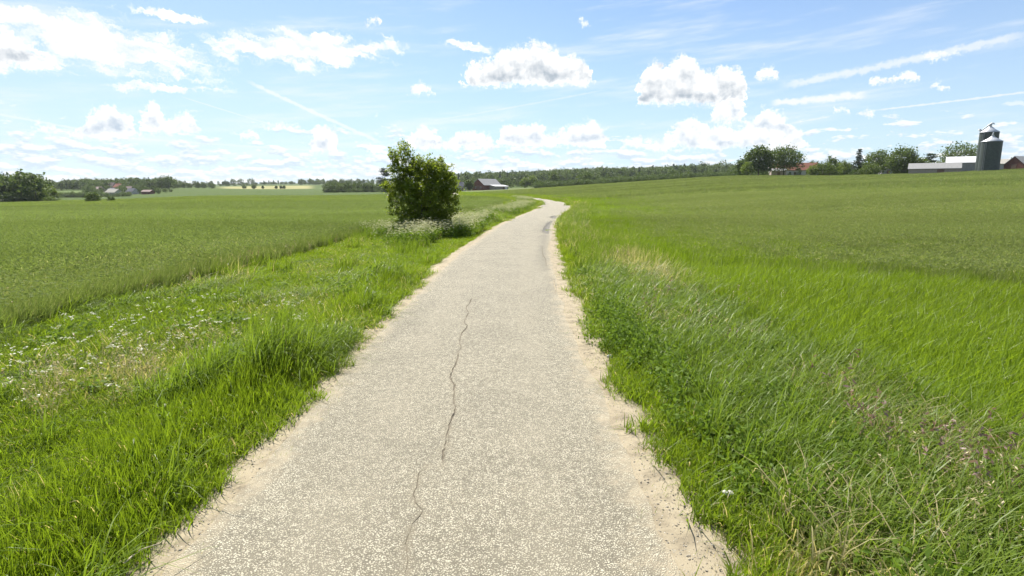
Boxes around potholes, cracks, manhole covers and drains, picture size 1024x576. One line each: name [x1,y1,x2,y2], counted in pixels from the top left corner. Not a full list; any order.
crack [405,299,472,574]
